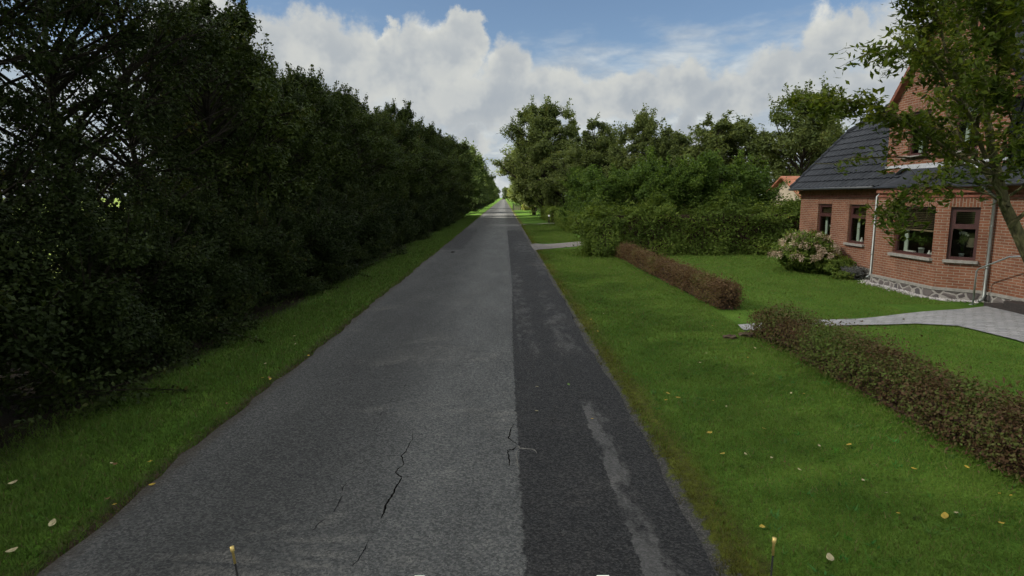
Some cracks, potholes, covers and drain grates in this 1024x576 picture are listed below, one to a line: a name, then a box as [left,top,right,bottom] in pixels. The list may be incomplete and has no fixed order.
crack [352,436,413,566]
